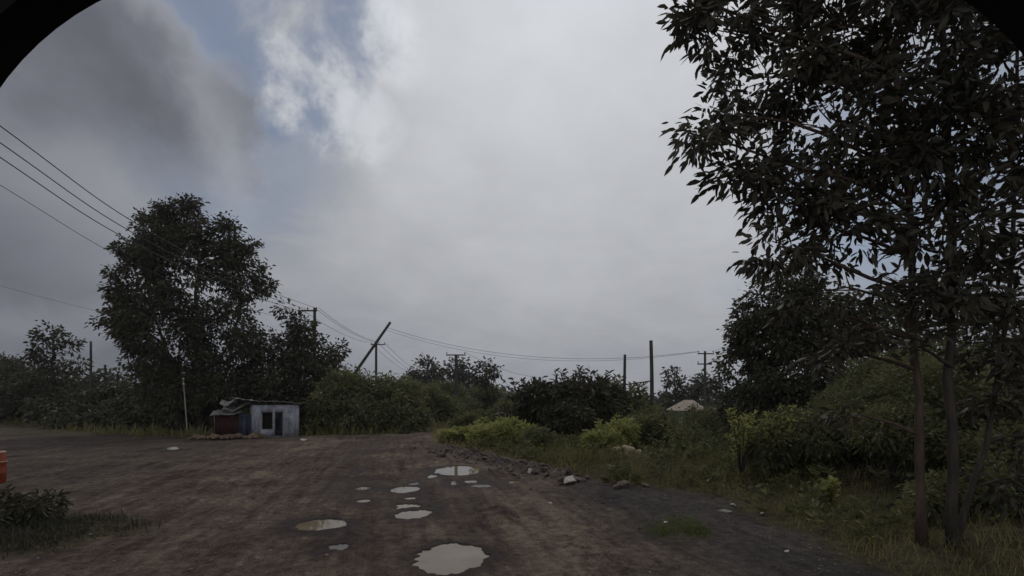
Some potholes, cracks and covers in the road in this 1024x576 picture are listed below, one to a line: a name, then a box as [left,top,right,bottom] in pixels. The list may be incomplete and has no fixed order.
pothole [286,517,357,533]
pothole [401,539,500,576]
pothole [385,507,441,521]
pothole [430,465,485,476]
pothole [384,485,426,494]
